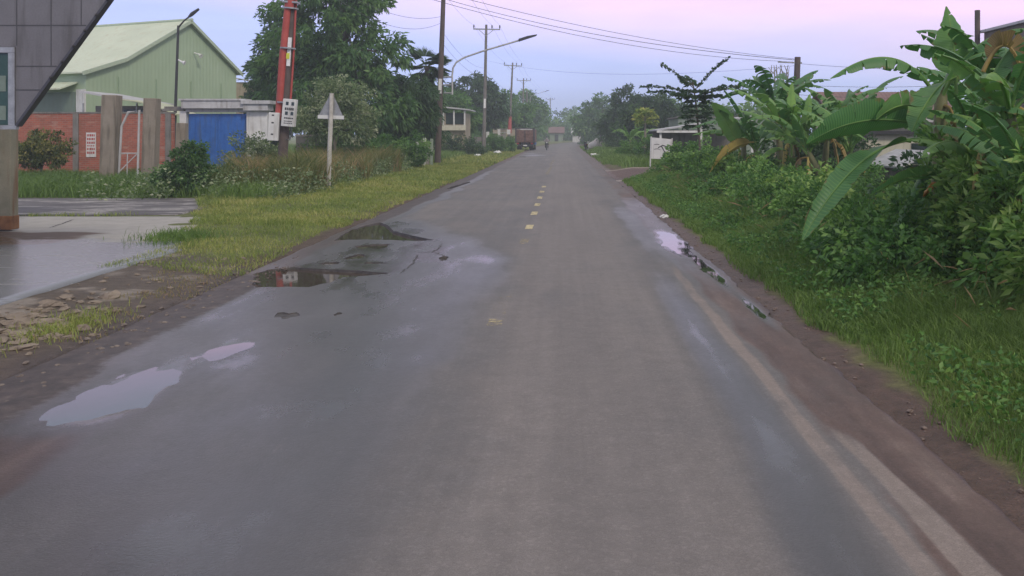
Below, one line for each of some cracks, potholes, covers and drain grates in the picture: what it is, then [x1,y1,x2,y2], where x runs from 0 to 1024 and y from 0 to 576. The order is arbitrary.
pothole [334,223,431,241]
pothole [252,267,389,285]
